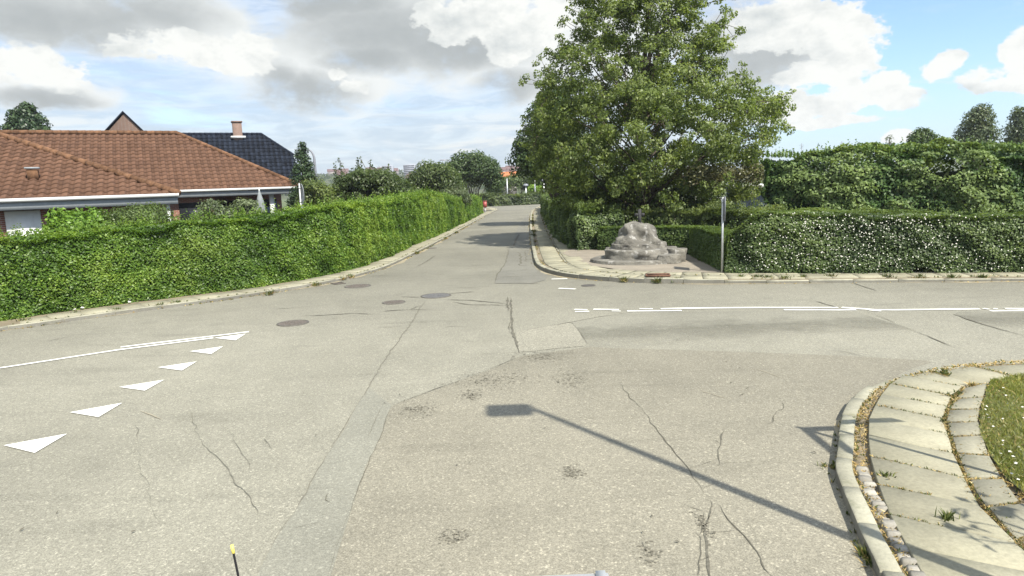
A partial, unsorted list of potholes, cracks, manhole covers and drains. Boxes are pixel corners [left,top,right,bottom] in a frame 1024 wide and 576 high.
crack [192,416,258,516]
crack [621,384,772,576]
